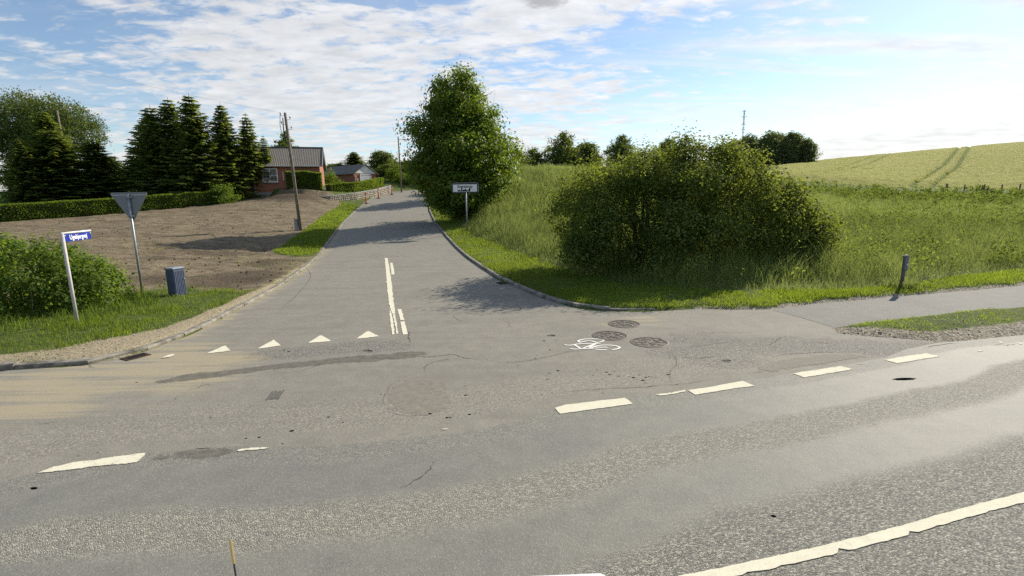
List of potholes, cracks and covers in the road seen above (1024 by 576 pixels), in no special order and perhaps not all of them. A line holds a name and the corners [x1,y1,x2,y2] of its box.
manhole cover [608,320,641,328]
manhole cover [592,331,628,341]
manhole cover [630,337,669,348]
drain grate [120,352,151,361]
